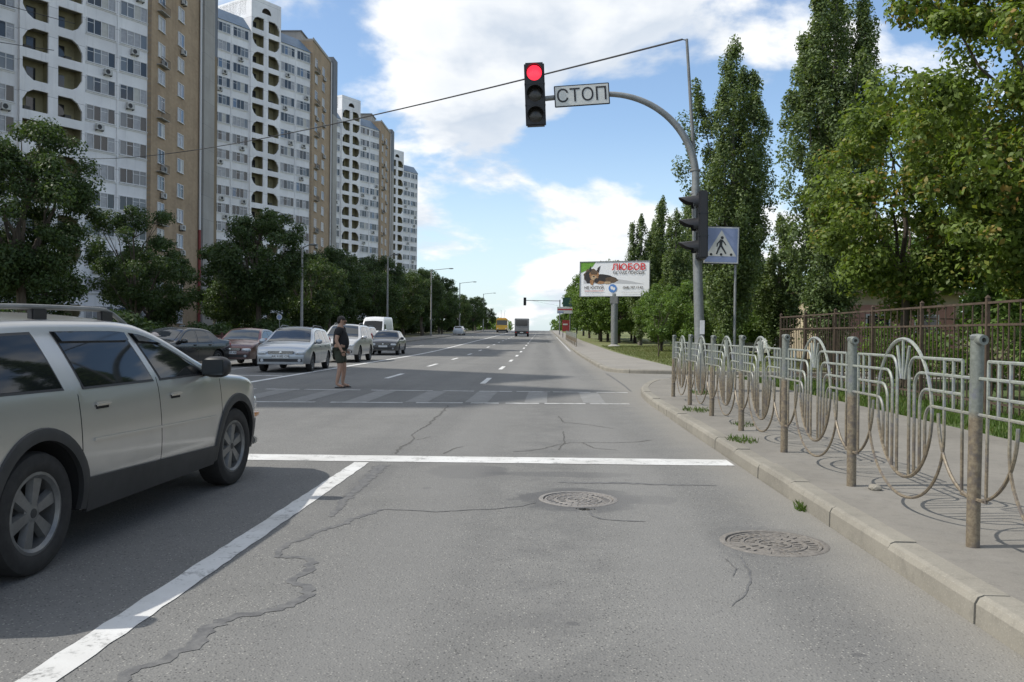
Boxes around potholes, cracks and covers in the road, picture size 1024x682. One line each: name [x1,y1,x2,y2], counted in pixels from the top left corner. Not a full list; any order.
manhole cover [539,491,618,507]
crack [513,416,648,452]
crack [725,556,752,606]
manhole cover [719,530,830,557]
crack [395,405,459,454]
